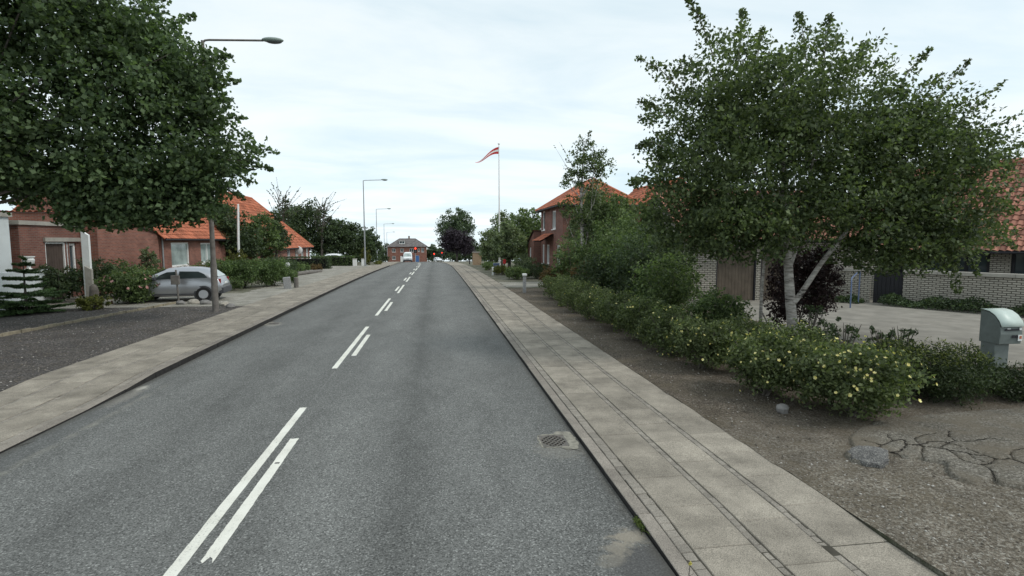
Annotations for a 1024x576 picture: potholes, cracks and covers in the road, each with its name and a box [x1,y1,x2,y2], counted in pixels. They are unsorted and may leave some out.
crack [854,431,1024,481]
drain grate [537,431,579,449]
